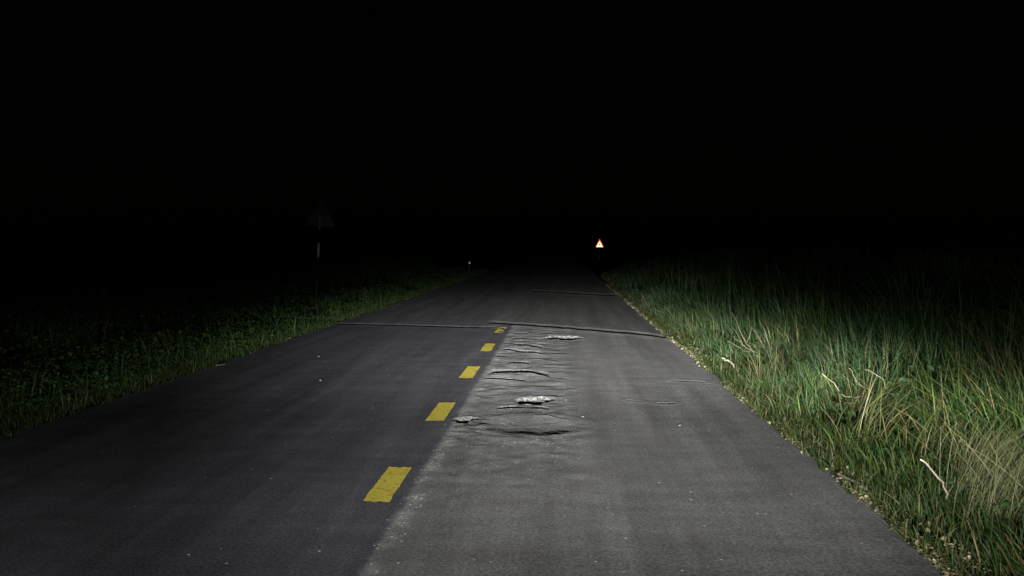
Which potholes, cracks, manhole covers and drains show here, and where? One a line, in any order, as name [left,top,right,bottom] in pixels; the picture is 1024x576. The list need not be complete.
pothole [468,412,600,437]
